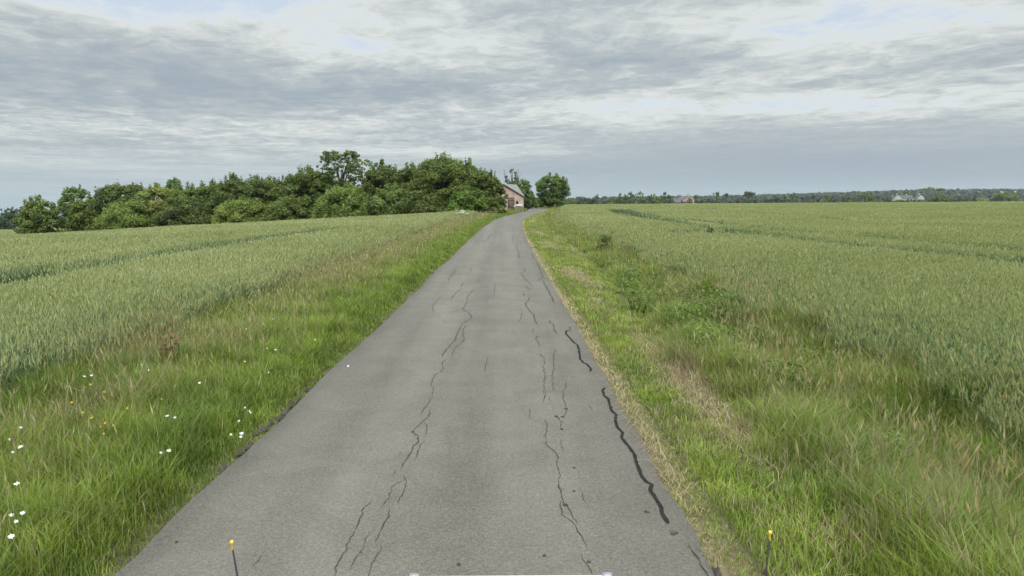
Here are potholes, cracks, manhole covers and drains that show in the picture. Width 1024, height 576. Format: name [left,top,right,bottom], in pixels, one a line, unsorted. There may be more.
crack [512,227,593,575]
crack [334,267,495,576]
